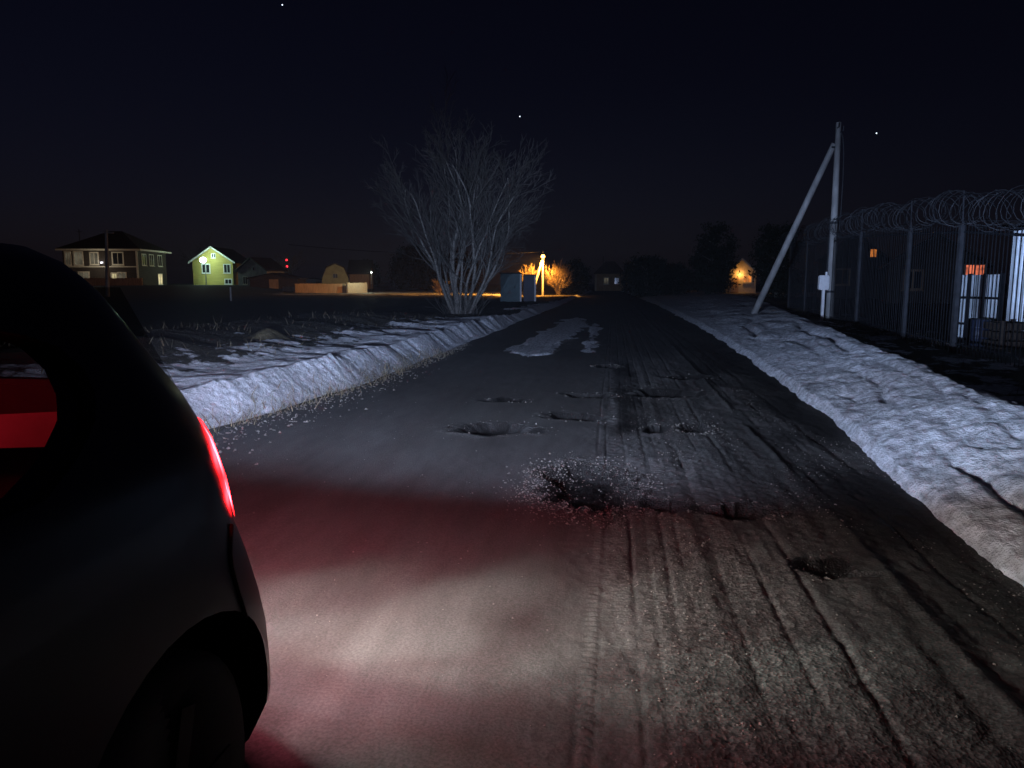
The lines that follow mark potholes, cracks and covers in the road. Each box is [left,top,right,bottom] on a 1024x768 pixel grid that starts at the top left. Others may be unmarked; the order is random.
pothole [537,461,648,516]
pothole [788,556,886,580]
pothole [446,422,545,436]
pothole [641,425,672,434]
pothole [675,422,711,434]
pothole [537,411,612,422]
